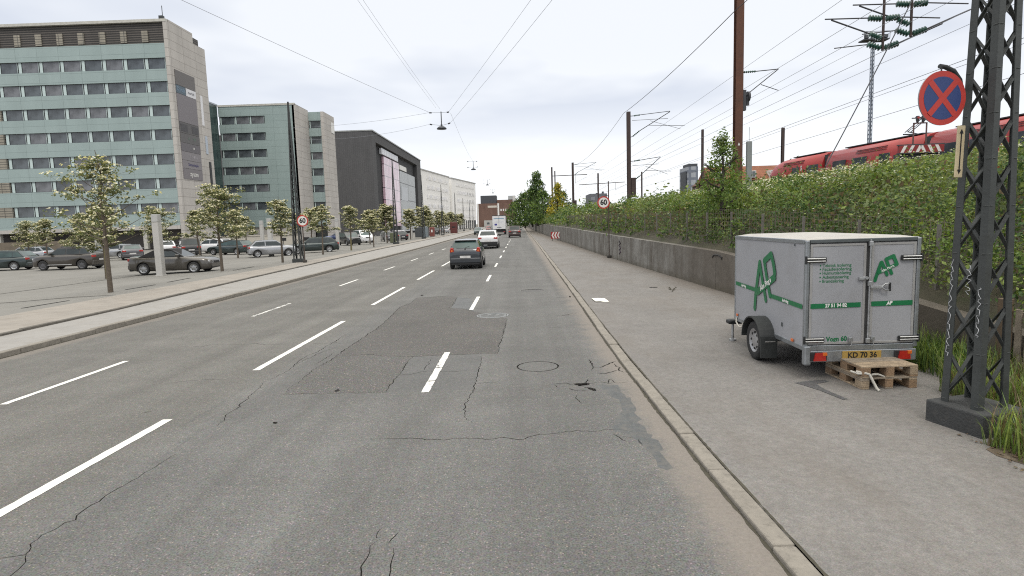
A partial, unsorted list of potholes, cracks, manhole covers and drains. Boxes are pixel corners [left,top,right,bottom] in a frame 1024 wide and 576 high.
crack [360,358,641,443]
crack [360,519,416,576]
manhole cover [517,362,559,372]
crack [0,454,176,576]
